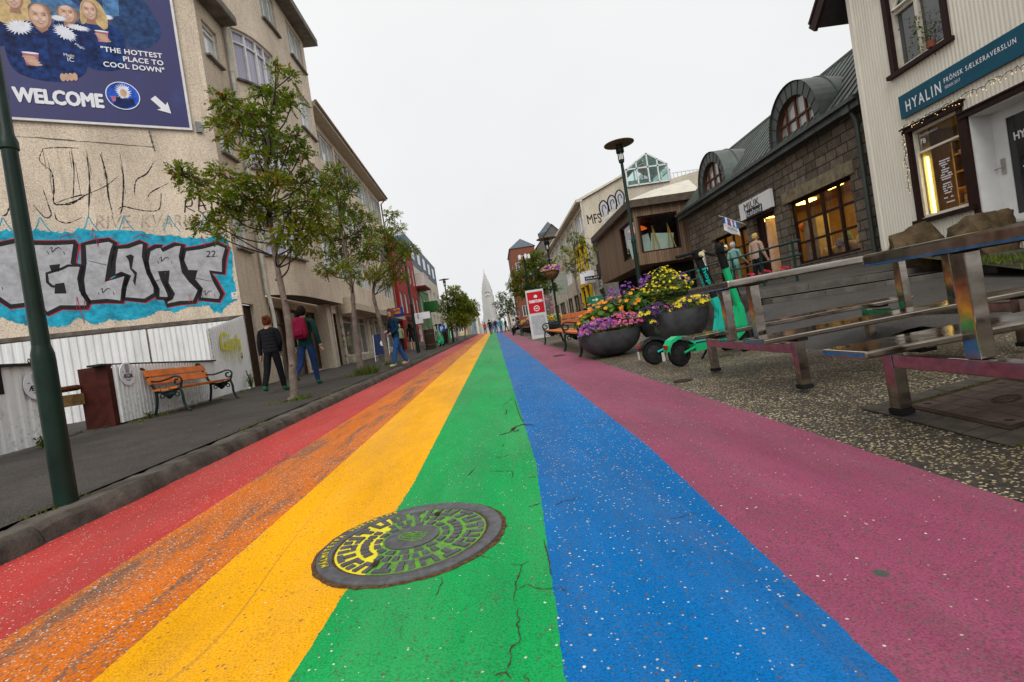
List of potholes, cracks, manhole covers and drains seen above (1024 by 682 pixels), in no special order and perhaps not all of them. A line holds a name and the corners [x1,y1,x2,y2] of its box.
crack [493,563,566,680]
crack [495,400,532,477]
manhole cover [311,502,507,590]
